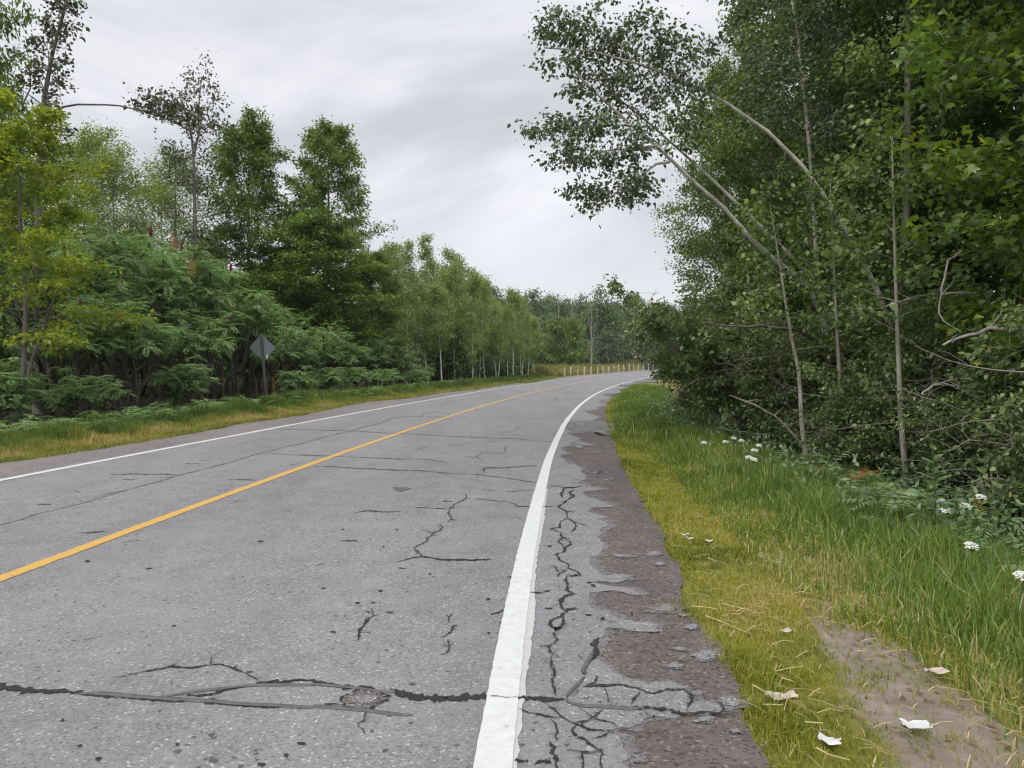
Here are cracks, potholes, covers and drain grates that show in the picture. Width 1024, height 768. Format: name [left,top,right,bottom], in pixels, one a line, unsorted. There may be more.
pothole [340,688,391,709]
crack [0,392,730,768]
